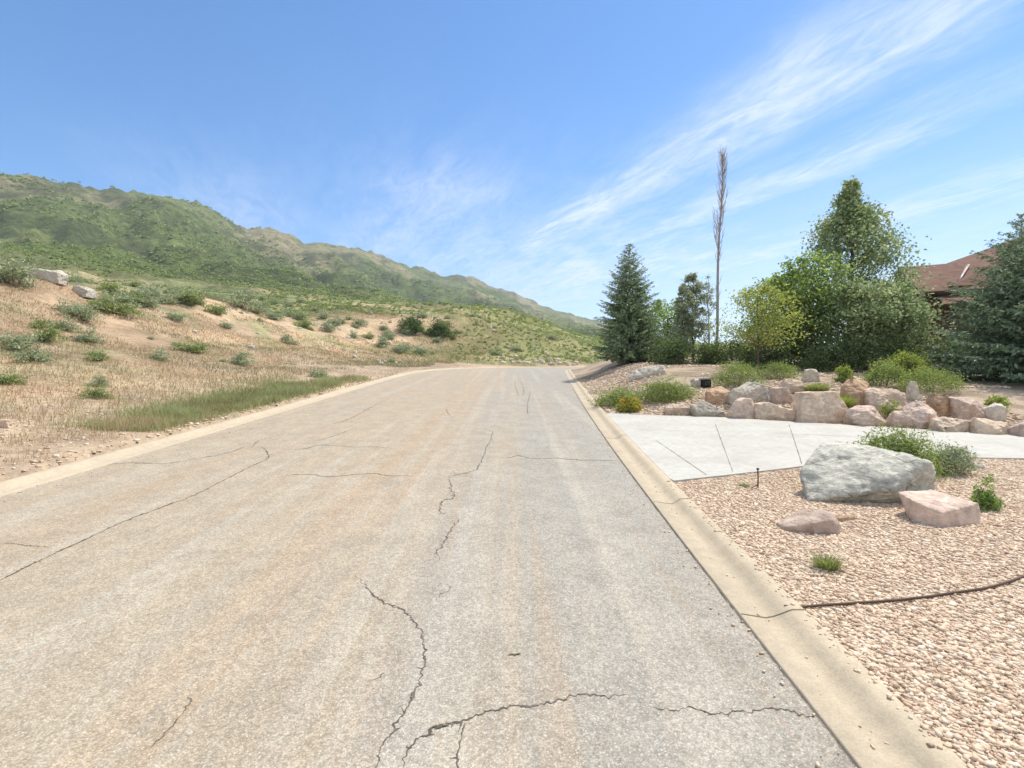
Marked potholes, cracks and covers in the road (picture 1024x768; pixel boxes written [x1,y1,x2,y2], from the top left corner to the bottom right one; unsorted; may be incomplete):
crack [3,439,270,579]
crack [355,575,816,768]
crack [435,429,577,561]
